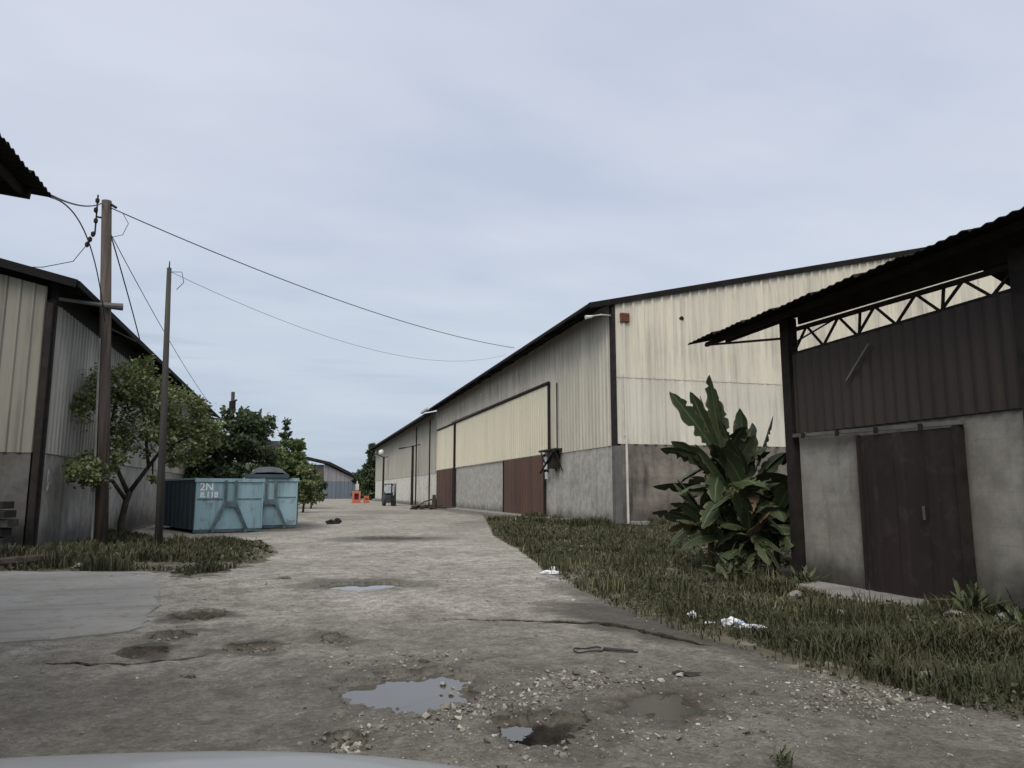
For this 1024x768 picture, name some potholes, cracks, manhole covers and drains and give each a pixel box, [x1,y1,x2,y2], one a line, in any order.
pothole [149,629,198,641]
pothole [597,681,726,724]
crack [436,617,711,646]
pothole [319,581,410,591]
pothole [112,646,169,659]
pothole [320,632,350,645]
crack [45,654,211,666]
pothole [485,708,592,747]
pothole [165,608,227,621]
pothole [329,663,481,714]
pothole [222,641,291,654]
